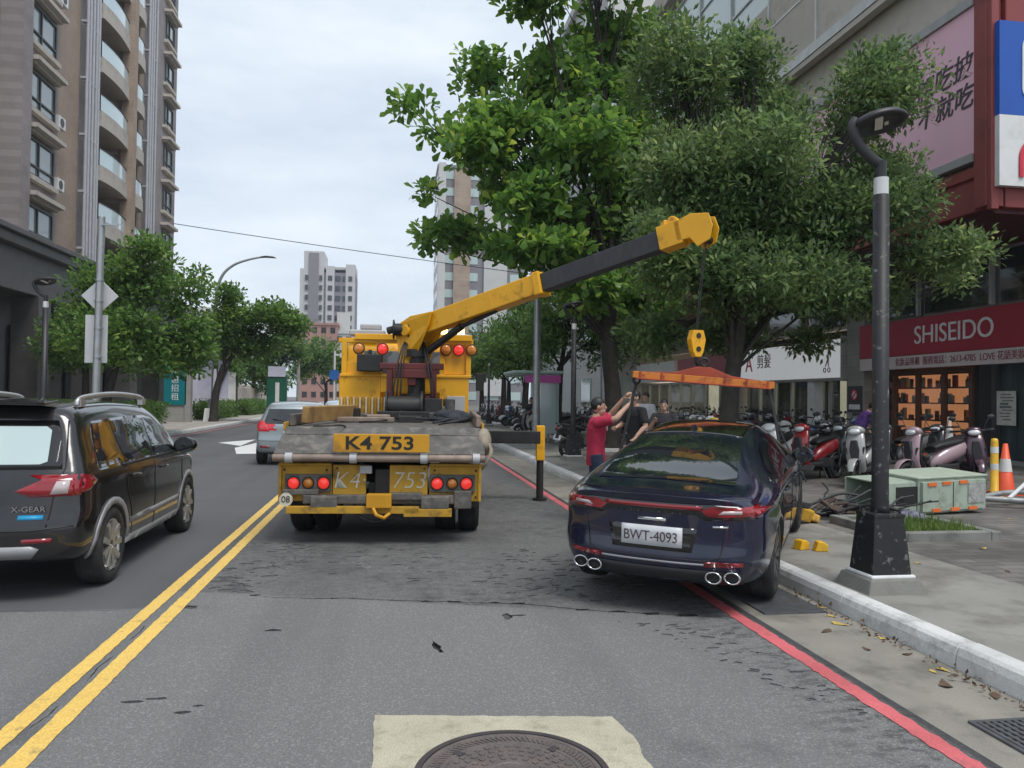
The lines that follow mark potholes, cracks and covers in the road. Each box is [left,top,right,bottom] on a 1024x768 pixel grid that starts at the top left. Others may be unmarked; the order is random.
drain grate [968,717,1024,755]
